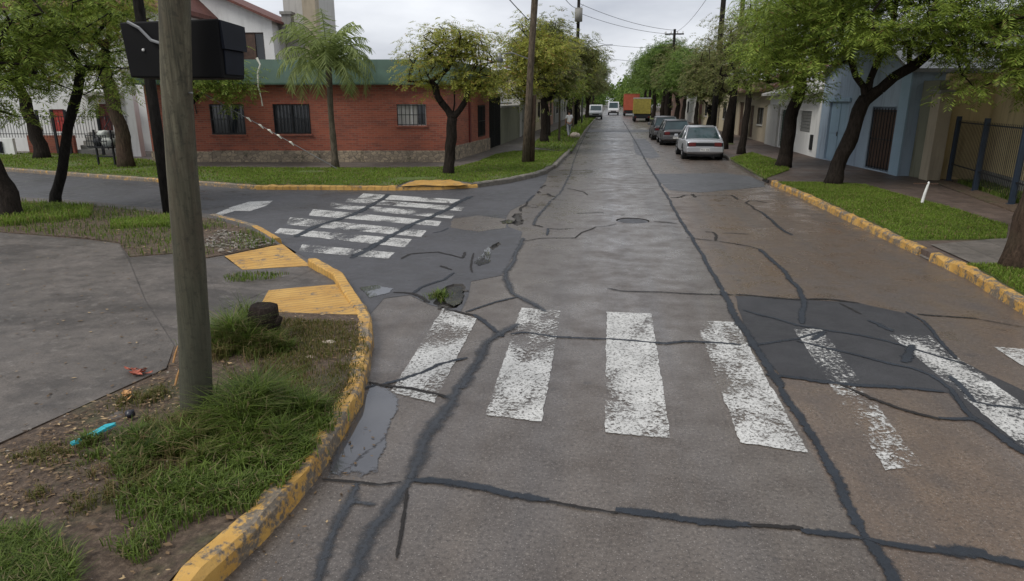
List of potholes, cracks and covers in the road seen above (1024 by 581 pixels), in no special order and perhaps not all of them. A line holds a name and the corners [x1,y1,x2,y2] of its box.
crack [401,252,474,293]
pothole [511,213,524,226]
pothole [433,284,469,309]
crack [510,195,1024,422]
